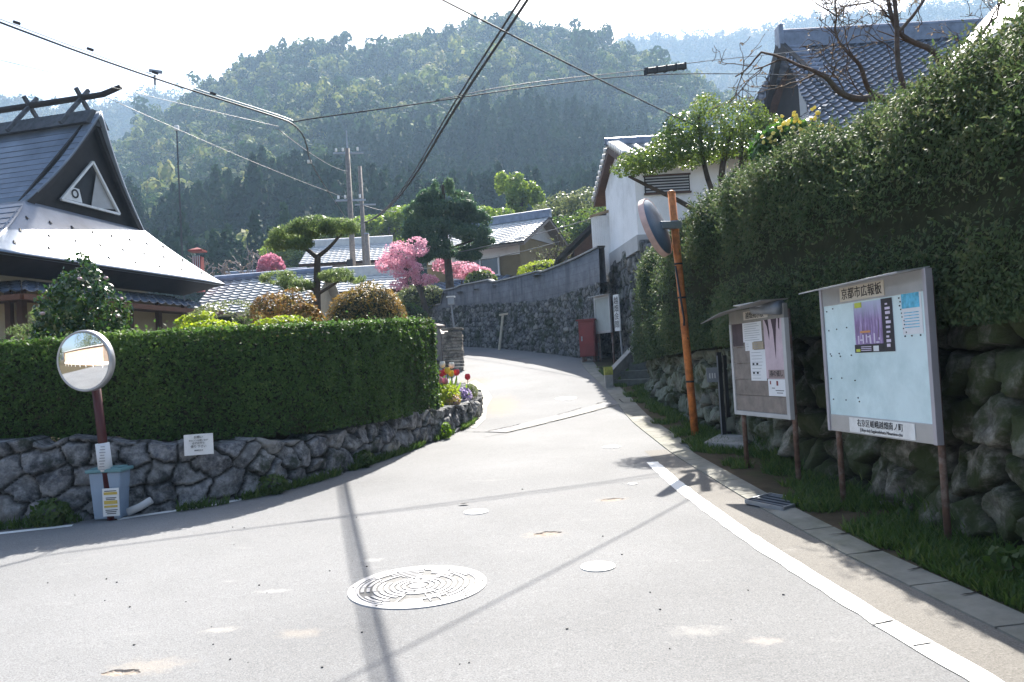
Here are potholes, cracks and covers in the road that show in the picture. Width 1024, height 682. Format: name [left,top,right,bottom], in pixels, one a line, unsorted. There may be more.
manhole cover [347,565,487,610]
drain grate [745,493,801,511]
utility cover [580,561,616,572]
